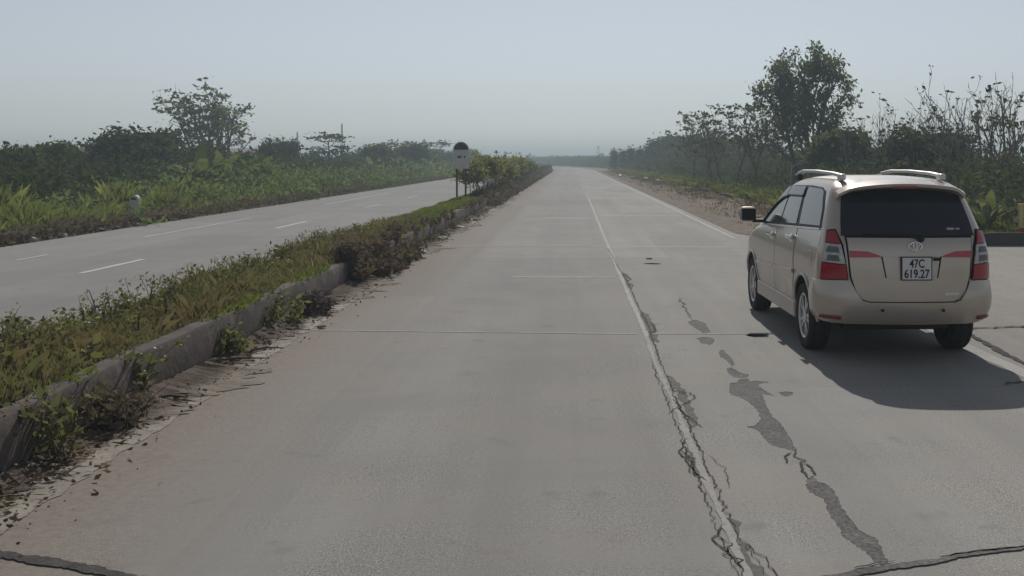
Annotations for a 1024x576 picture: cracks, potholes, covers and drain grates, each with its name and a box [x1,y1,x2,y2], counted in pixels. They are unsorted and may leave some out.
crack [784,448,816,477]
crack [609,251,778,576]
